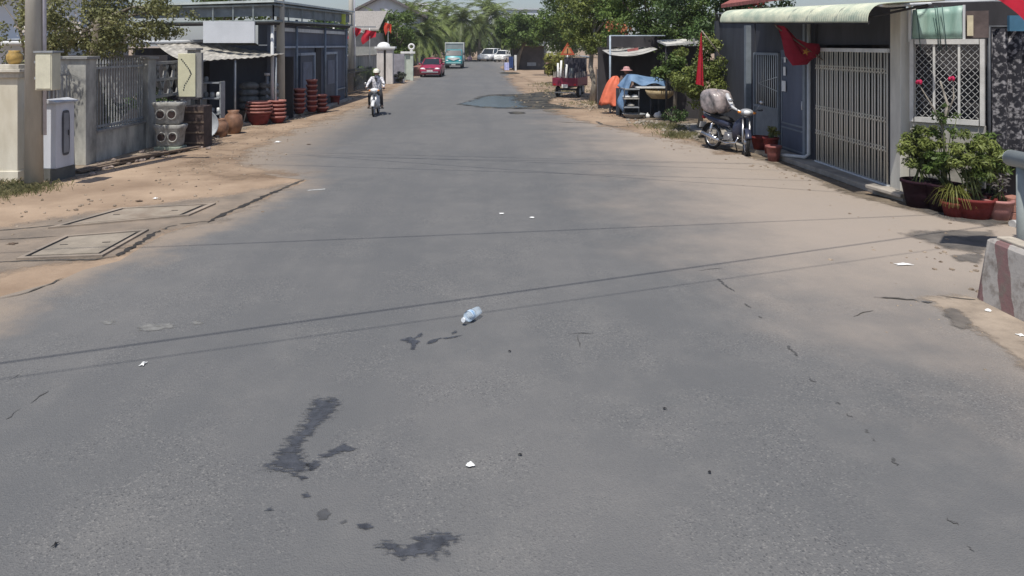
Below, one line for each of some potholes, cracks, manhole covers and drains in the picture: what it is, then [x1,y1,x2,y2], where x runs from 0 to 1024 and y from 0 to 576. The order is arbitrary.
pothole [459,92,588,109]
crack [856,295,976,316]
manhole cover [48,203,216,229]
manhole cover [16,229,149,260]
